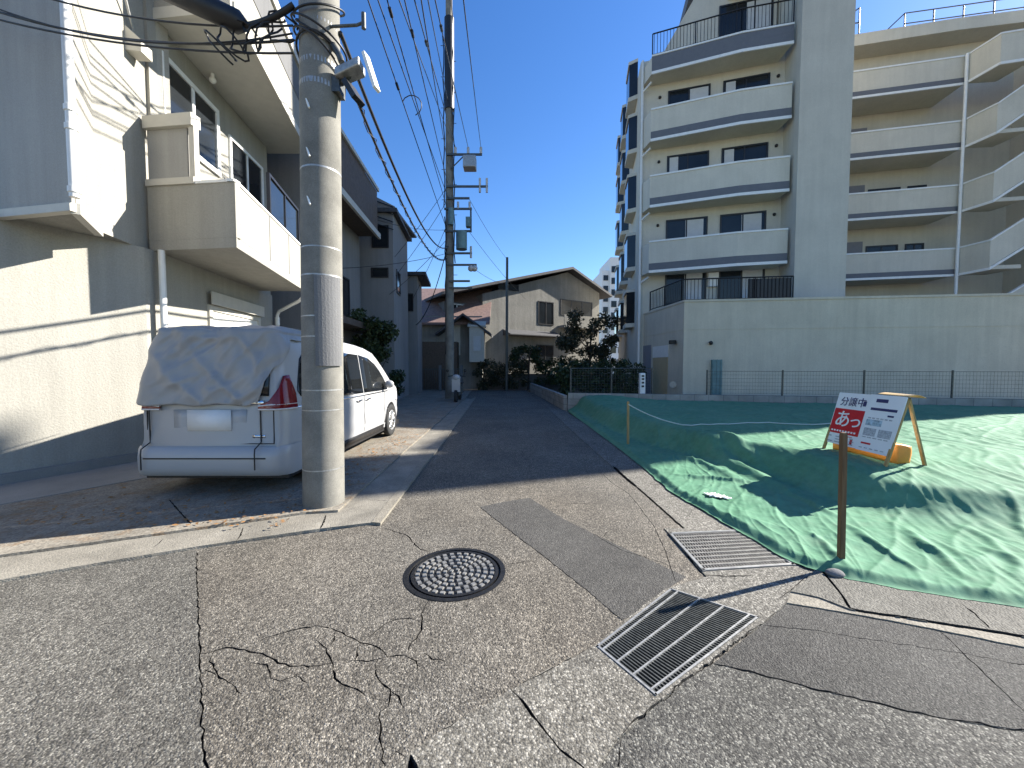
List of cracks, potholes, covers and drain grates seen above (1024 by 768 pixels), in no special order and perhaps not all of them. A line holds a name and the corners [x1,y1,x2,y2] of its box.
drain grate [669,529,796,571]
crack [203,602,444,766]
manhole cover [403,548,505,602]
crack [939,604,1024,711]
drain grate [596,588,759,696]
